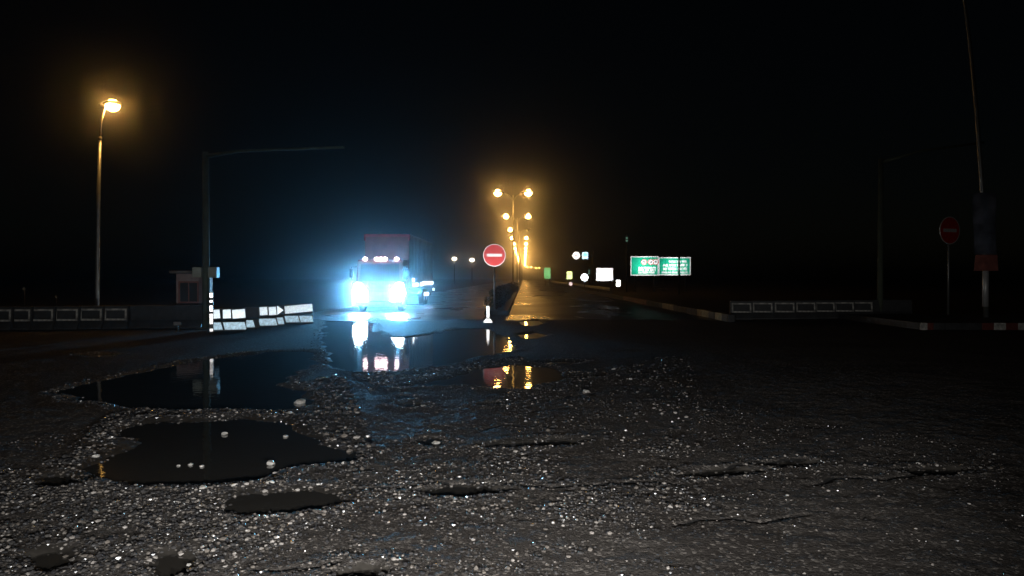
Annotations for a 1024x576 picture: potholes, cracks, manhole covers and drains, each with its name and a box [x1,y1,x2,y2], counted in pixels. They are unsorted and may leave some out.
pothole [205,485,360,516]
pothole [417,484,513,497]
pothole [14,542,87,572]
pothole [56,349,324,411]
pothole [62,414,362,486]
crack [677,516,805,526]
pothole [514,331,552,339]
pothole [316,319,518,372]
pothole [377,363,571,389]
crack [724,458,915,486]
